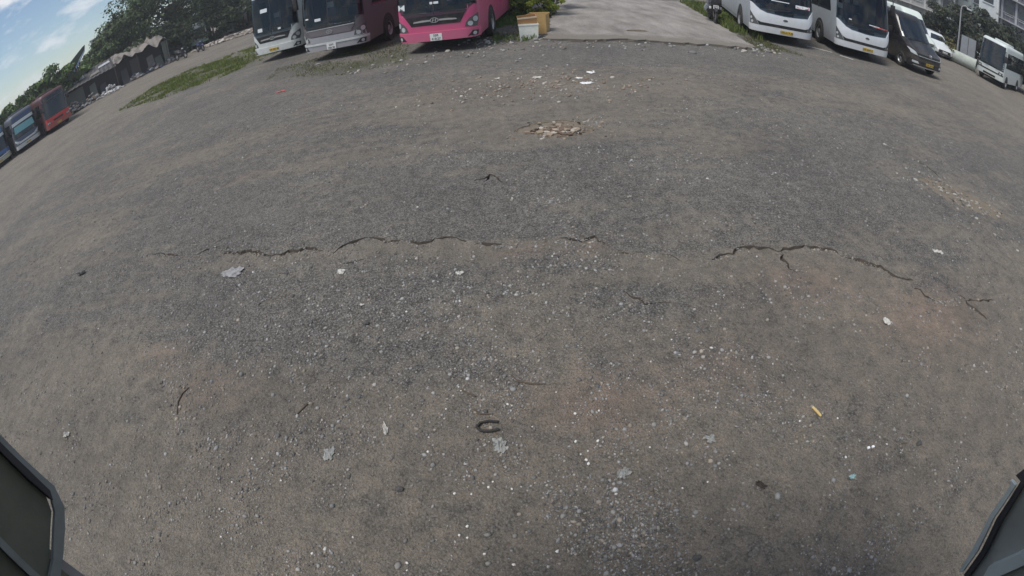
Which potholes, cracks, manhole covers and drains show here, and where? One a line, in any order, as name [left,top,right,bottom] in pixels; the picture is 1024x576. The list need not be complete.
crack [196,236,501,274]
crack [707,245,992,319]
crack [474,174,505,185]
crack [562,235,629,254]
crack [624,291,673,305]
pothole [514,120,595,137]
